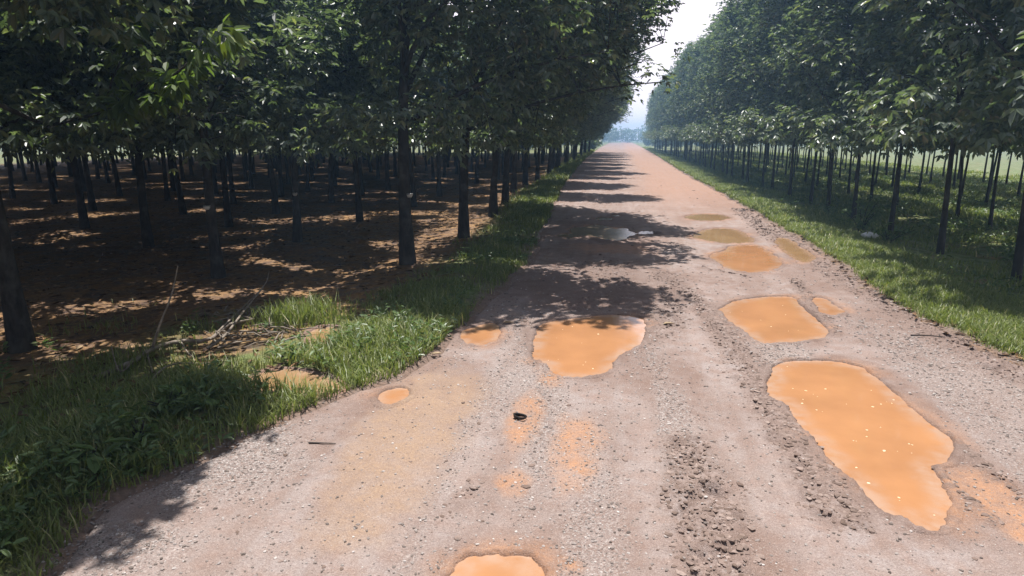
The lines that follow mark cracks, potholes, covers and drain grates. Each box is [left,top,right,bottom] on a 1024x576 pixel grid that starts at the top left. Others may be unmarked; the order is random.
pothole [771,236,821,263]
pothole [525,312,652,379]
pothole [689,227,758,244]
pothole [367,384,418,409]
pothole [714,294,835,345]
pothole [706,244,786,273]
pothole [806,295,850,317]
pothole [554,223,653,241]
pothole [453,321,508,347]
pothole [683,213,734,221]
pothole [435,545,555,576]
pothole [760,357,966,536]
